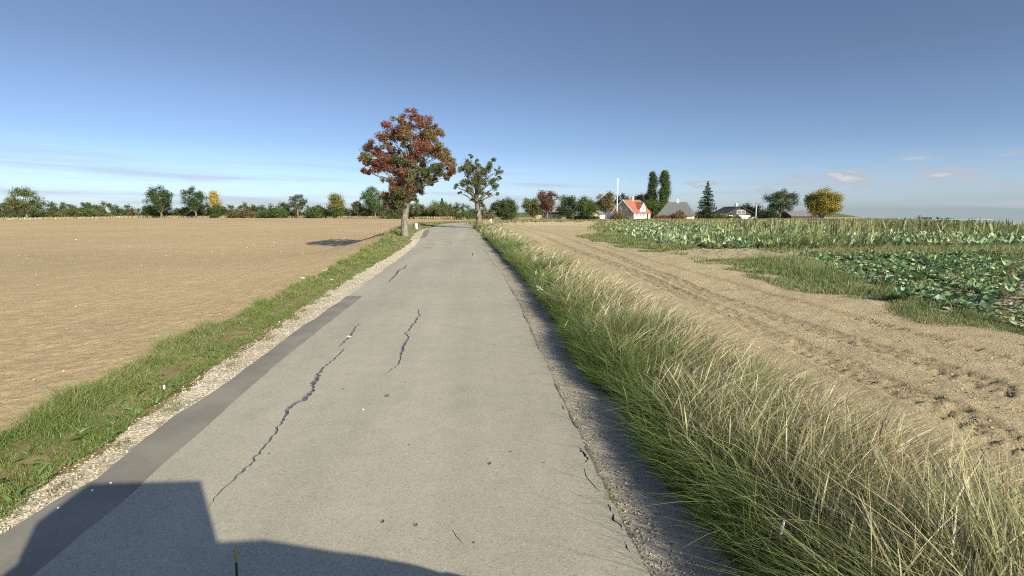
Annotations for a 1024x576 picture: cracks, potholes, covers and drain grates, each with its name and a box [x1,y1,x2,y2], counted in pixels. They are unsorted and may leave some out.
crack [383,310,437,375]
crack [209,323,361,505]
crack [578,447,630,552]
